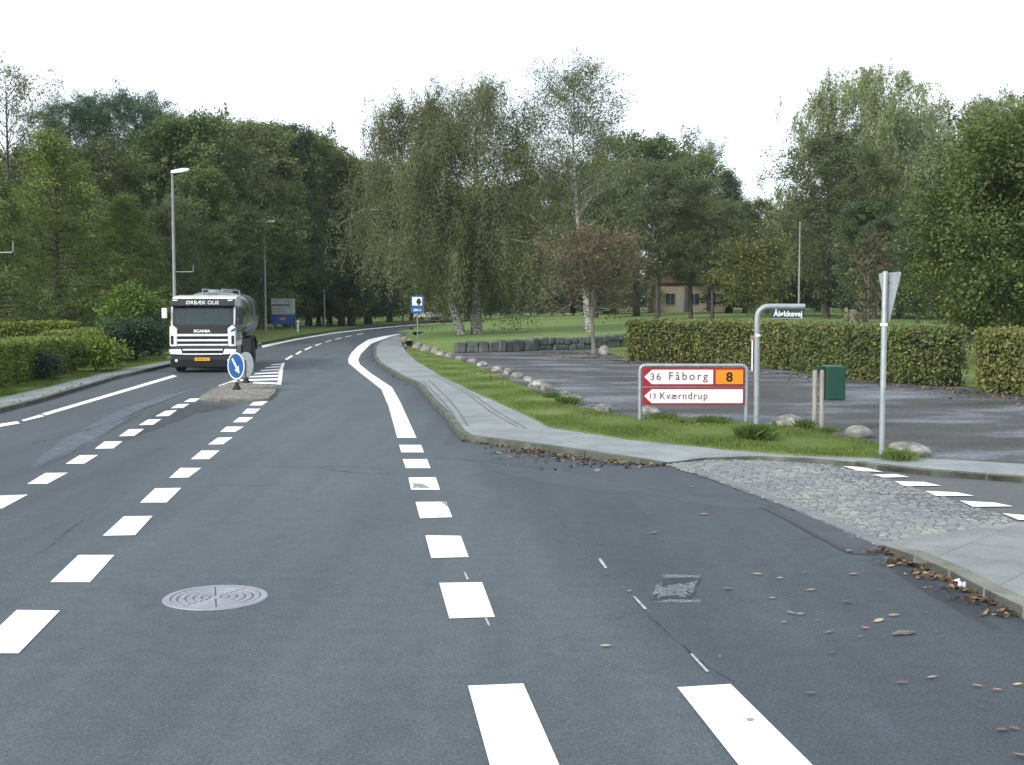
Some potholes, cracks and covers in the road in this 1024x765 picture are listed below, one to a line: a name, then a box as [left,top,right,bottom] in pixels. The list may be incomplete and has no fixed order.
manhole cover [162,585,268,611]
